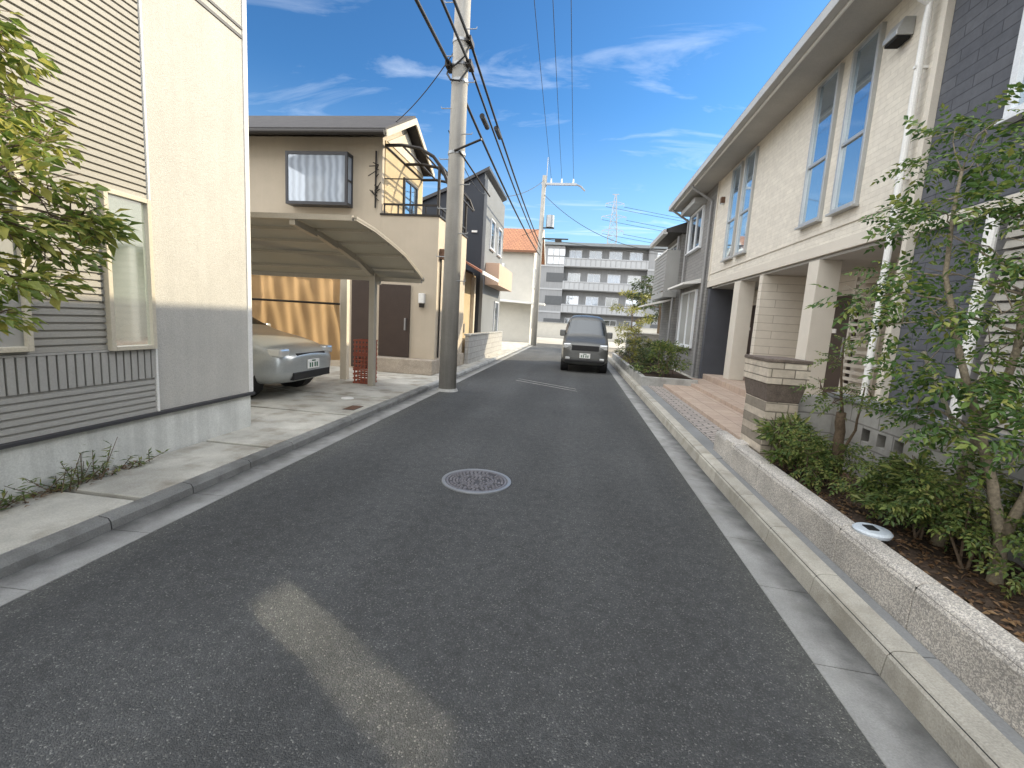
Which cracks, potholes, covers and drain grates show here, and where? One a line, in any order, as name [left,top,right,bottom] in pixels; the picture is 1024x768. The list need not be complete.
manhole cover [442,469,511,494]
